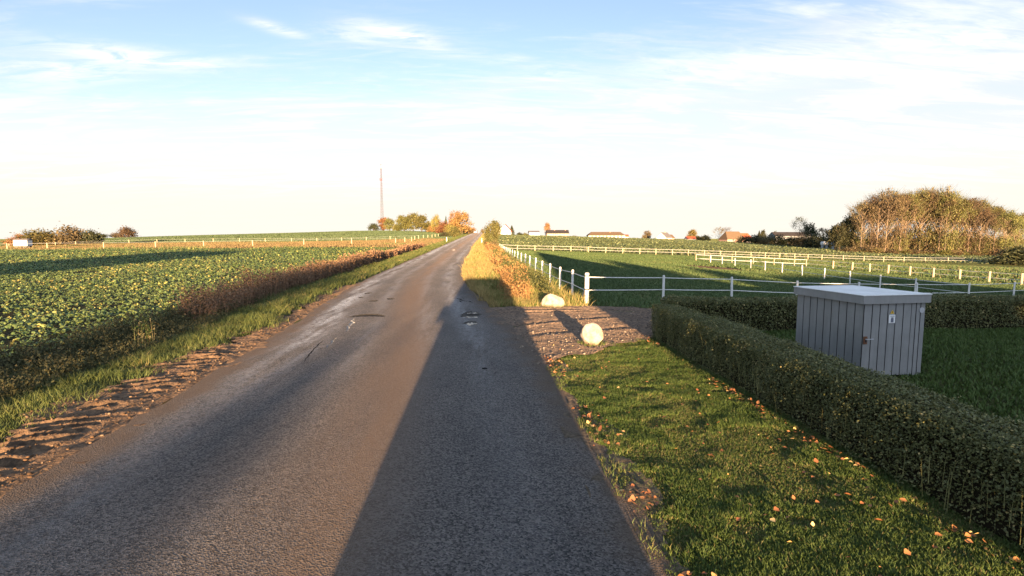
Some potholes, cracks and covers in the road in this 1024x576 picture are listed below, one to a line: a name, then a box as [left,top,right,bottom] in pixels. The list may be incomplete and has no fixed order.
crack [304,319,355,362]
